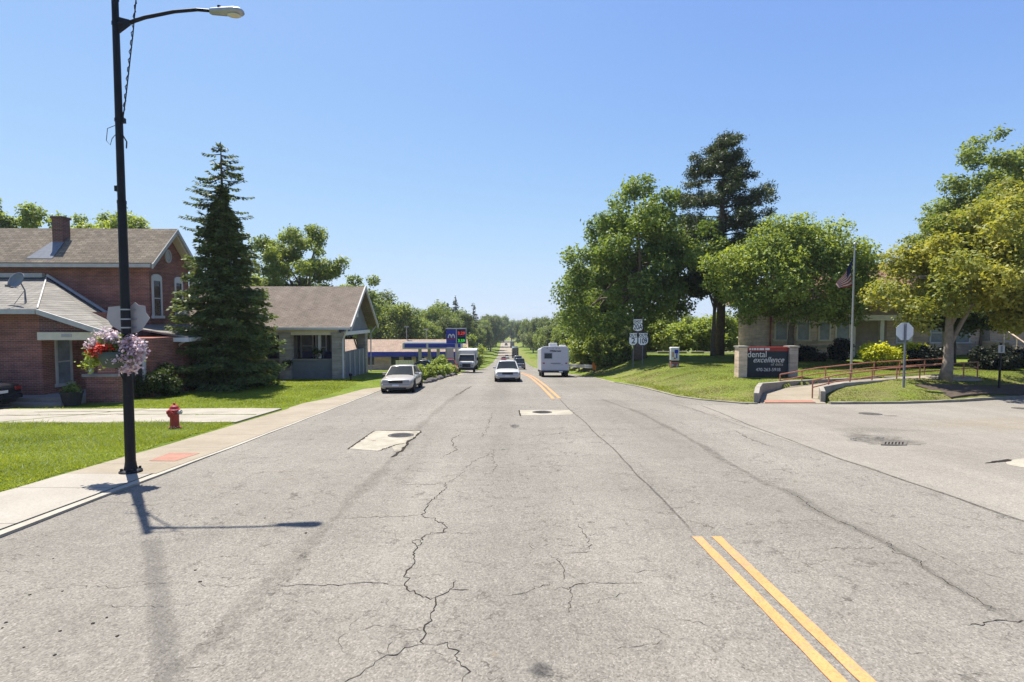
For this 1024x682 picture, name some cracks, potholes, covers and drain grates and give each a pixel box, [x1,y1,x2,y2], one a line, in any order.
crack [9,413,503,682]
crack [815,541,1024,626]
crack [513,524,668,610]
